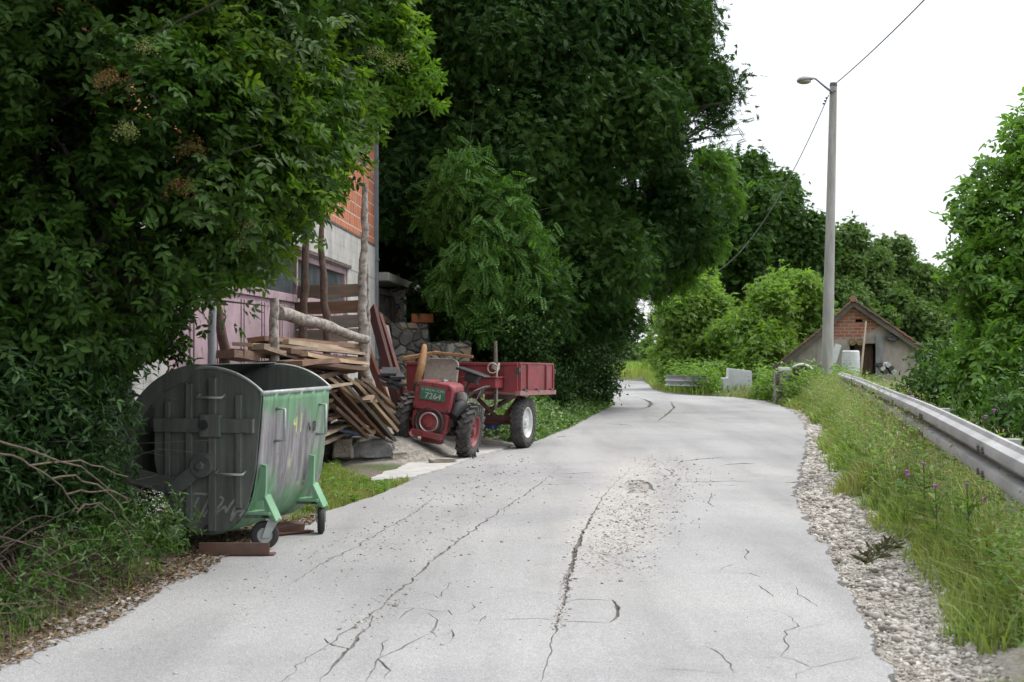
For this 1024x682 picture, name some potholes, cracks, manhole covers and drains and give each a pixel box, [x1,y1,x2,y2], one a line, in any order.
crack [366,583,486,681]
crack [620,398,675,425]
crack [686,457,800,507]
crack [295,504,425,581]
pothole [624,480,653,494]
